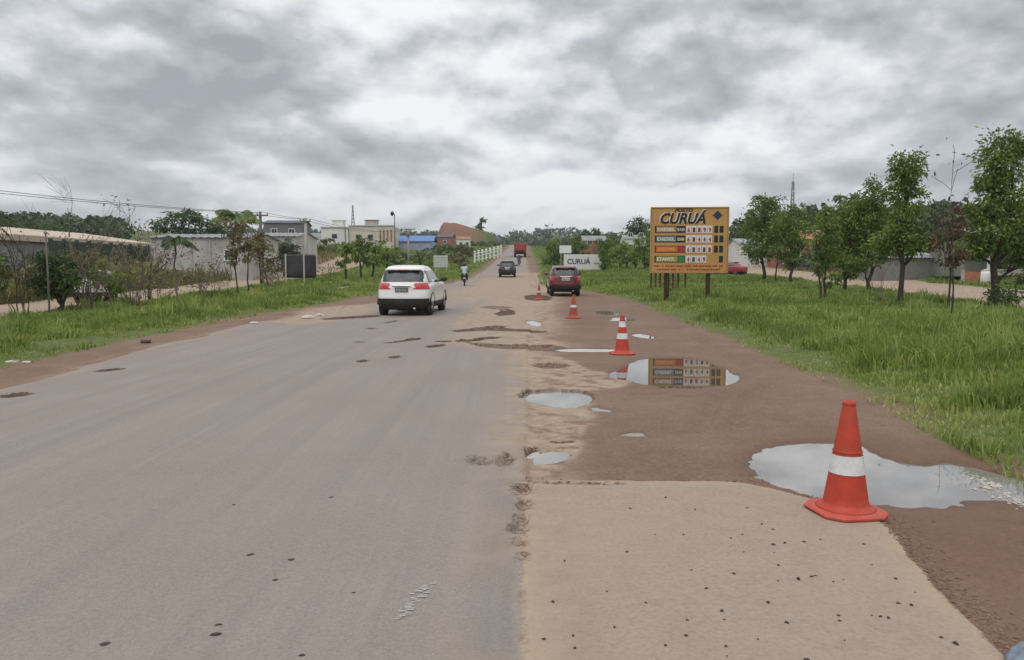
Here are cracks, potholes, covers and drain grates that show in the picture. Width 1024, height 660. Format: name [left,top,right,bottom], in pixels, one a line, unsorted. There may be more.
pothole [518,389,596,408]
pothole [465,454,495,465]
pothole [494,451,521,467]
pothole [494,308,517,316]
pothole [512,481,537,497]
pothole [506,512,535,534]
pothole [451,325,549,333]
pothole [527,450,574,465]
pothole [512,534,536,546]
pothole [517,498,538,512]
pothole [518,549,538,561]
